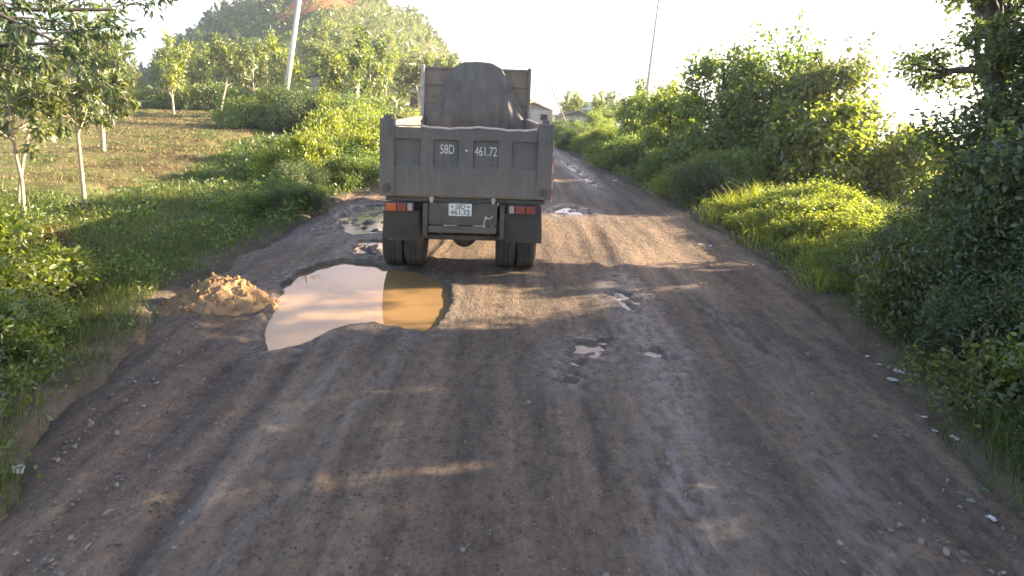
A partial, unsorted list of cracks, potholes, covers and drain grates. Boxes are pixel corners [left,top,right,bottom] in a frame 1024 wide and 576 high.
pothole [604,288,645,311]
pothole [638,345,681,364]
pothole [348,239,383,256]
pothole [334,204,385,235]
pothole [553,204,594,216]
pothole [260,258,454,351]
pothole [556,337,618,384]
